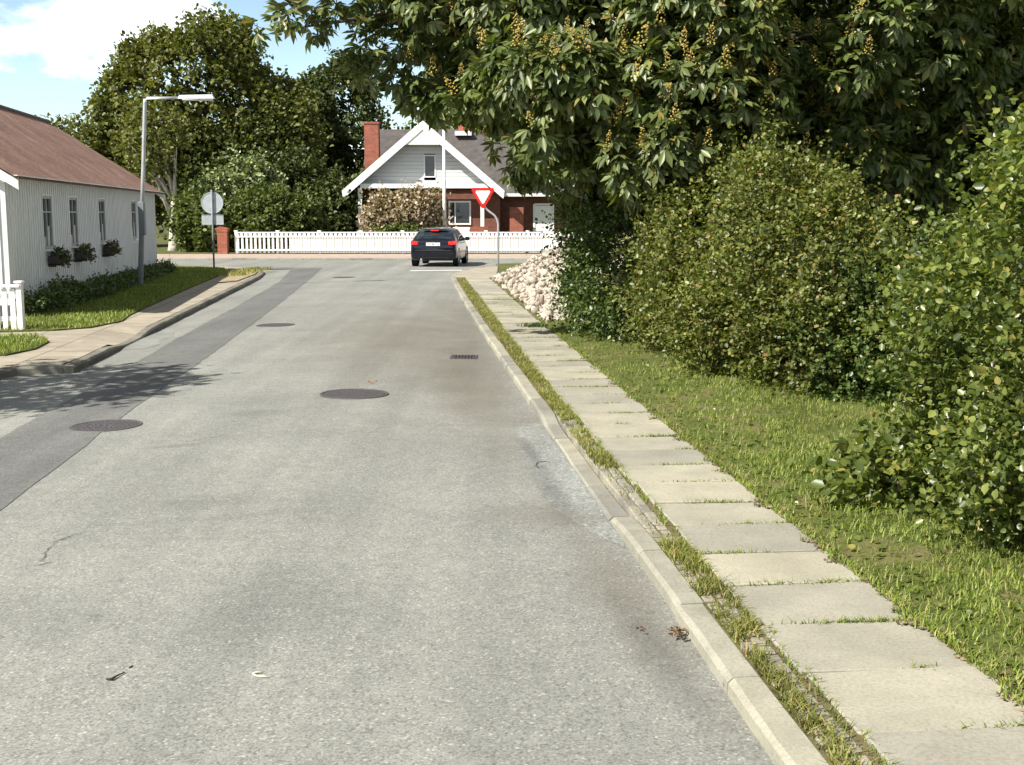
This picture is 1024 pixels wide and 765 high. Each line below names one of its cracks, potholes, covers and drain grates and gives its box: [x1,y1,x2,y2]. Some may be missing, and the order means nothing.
manhole cover [320,389,389,399]
manhole cover [68,419,143,432]
